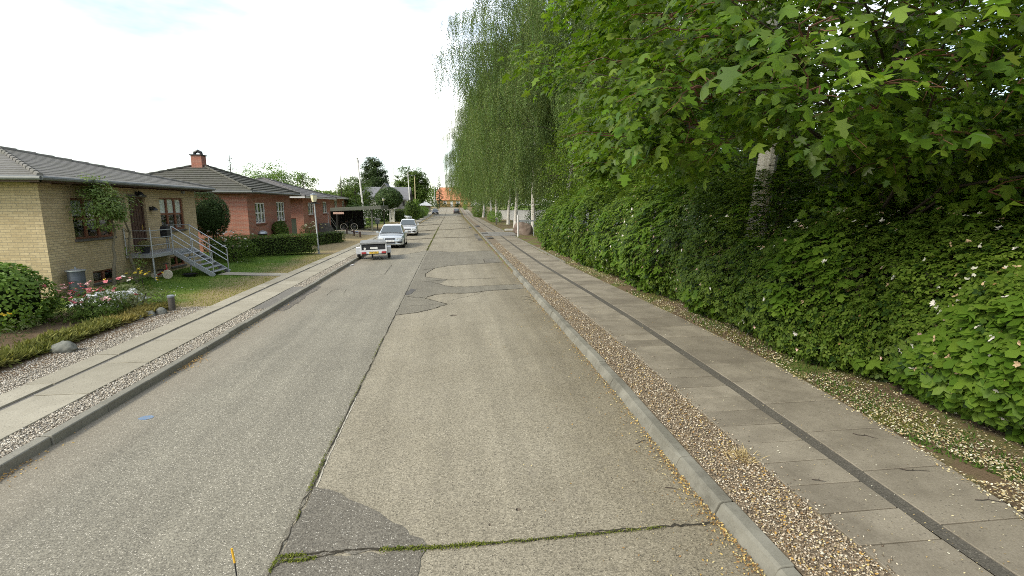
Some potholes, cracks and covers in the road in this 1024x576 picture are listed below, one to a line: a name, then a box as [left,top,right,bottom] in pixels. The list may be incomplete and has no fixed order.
crack [267,458,713,576]
